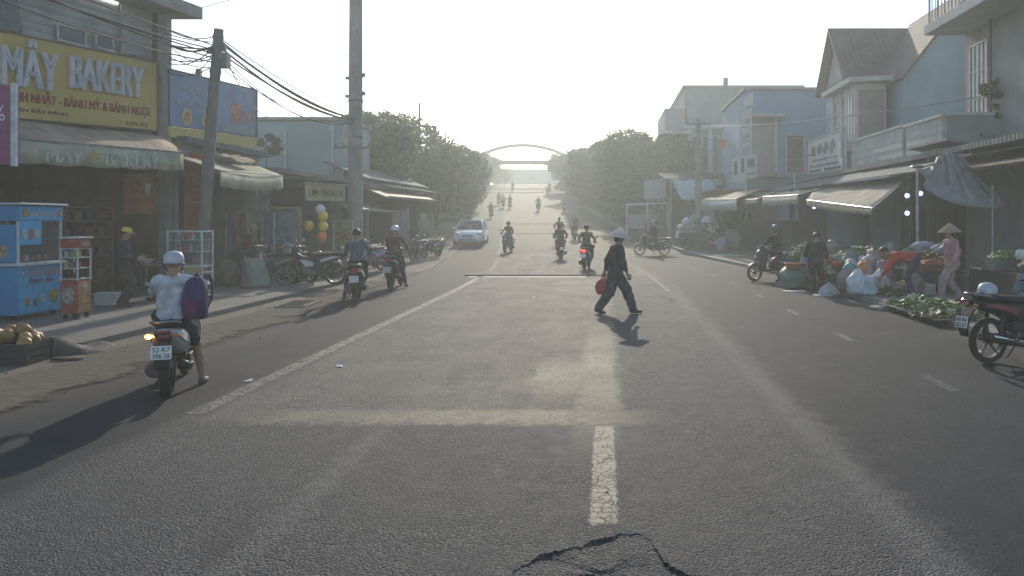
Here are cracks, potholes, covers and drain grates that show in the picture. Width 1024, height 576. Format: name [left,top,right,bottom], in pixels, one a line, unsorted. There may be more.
pothole [512,533,689,576]
